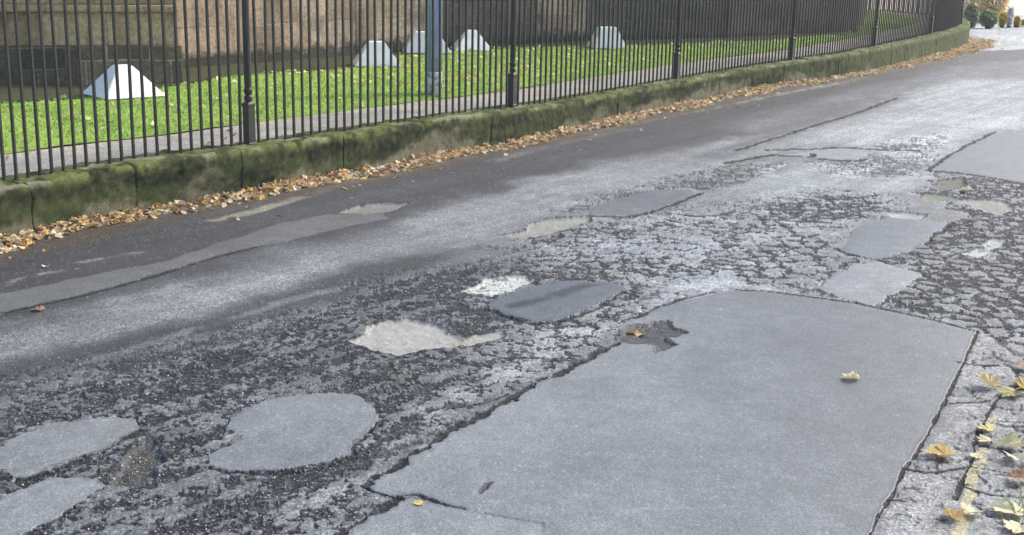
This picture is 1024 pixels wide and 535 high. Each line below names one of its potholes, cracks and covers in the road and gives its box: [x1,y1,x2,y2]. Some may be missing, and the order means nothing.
pothole [460,273,536,297]
crack [0,132,1024,535]
pothole [496,214,593,239]
pothole [348,317,508,356]
pothole [612,319,690,353]
pothole [338,201,410,214]
pothole [107,434,169,491]
